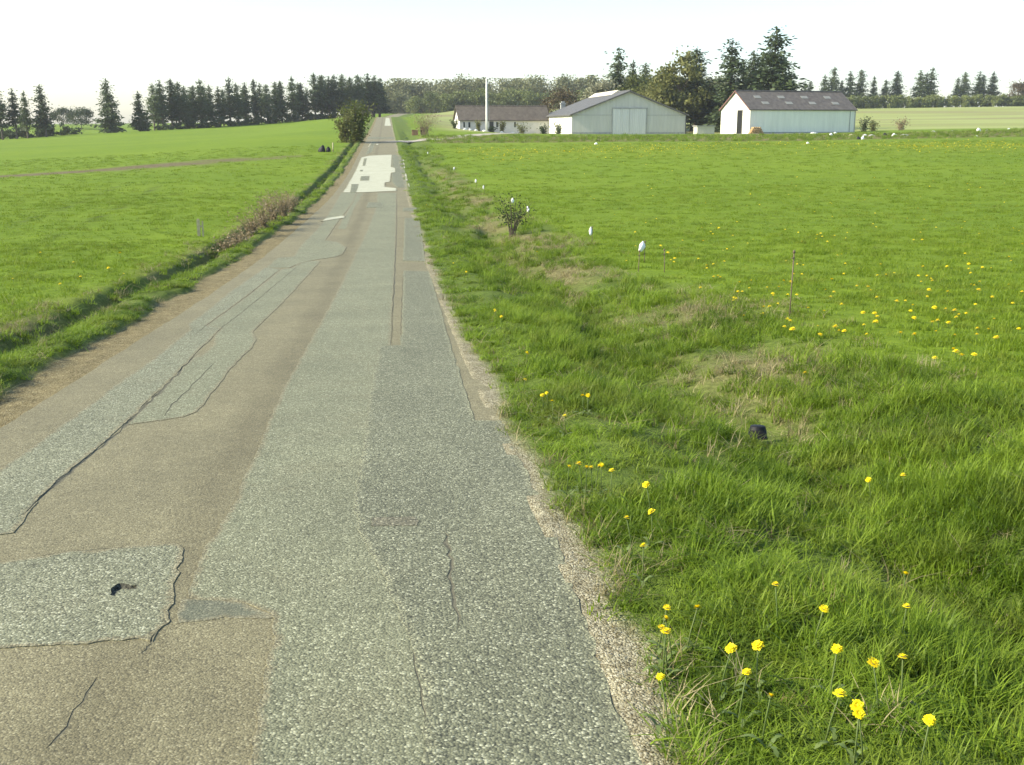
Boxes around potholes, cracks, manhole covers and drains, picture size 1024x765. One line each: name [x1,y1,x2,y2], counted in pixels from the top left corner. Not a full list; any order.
crack [443,533,461,629]
crack [413,651,426,720]
crack [47,678,97,748]
crack [12,355,214,523]
pothole [111,583,137,596]
